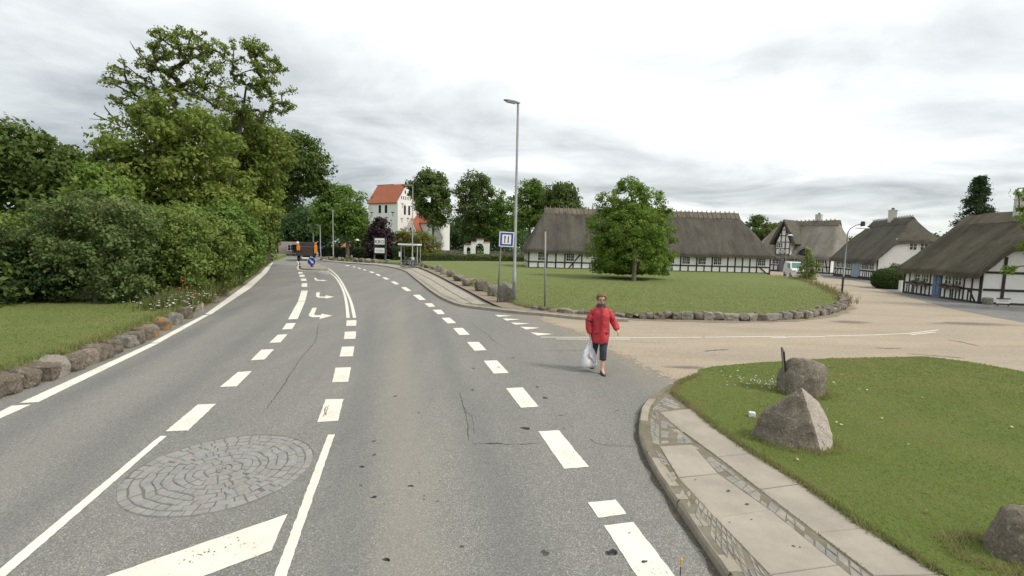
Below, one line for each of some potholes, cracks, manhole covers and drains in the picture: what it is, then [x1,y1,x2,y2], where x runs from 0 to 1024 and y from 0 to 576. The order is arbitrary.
crack [459,392,537,445]
